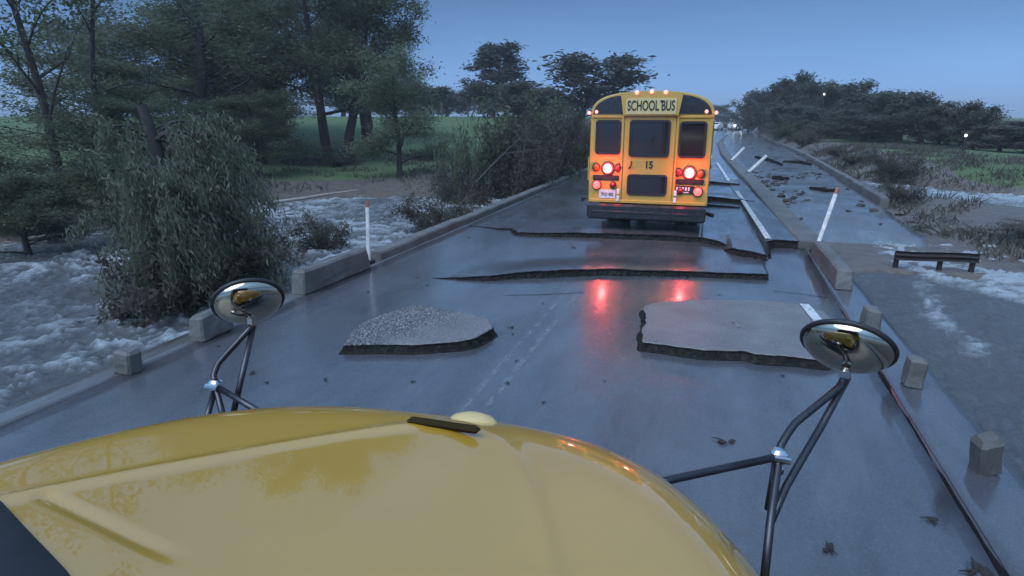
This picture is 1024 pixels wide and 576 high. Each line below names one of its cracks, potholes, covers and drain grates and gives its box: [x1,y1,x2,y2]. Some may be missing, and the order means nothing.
crack [435,226,1009,576]
